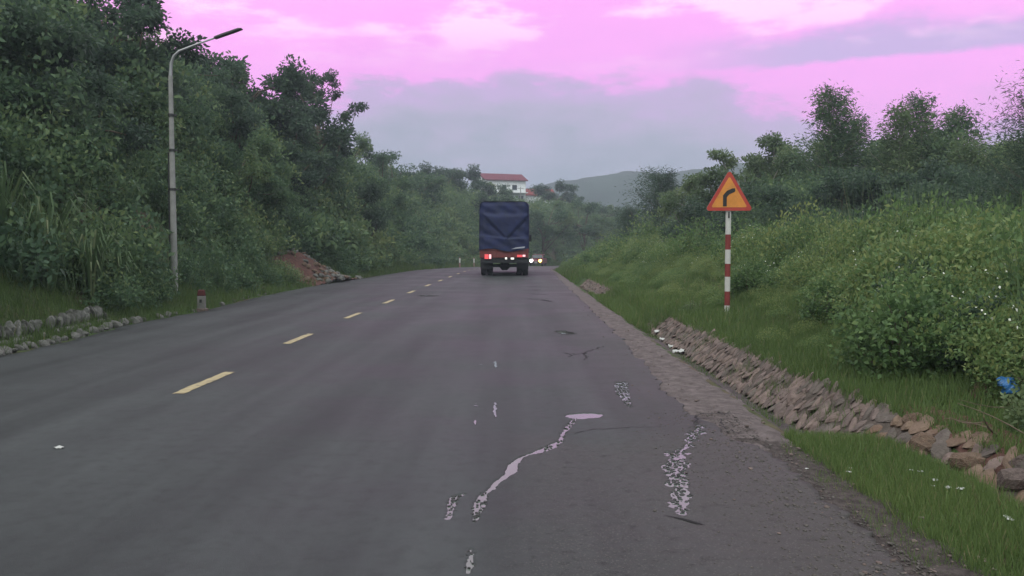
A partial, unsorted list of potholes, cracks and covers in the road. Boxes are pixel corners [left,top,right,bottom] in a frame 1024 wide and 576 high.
crack [661,413,742,524]
crack [444,403,577,574]
